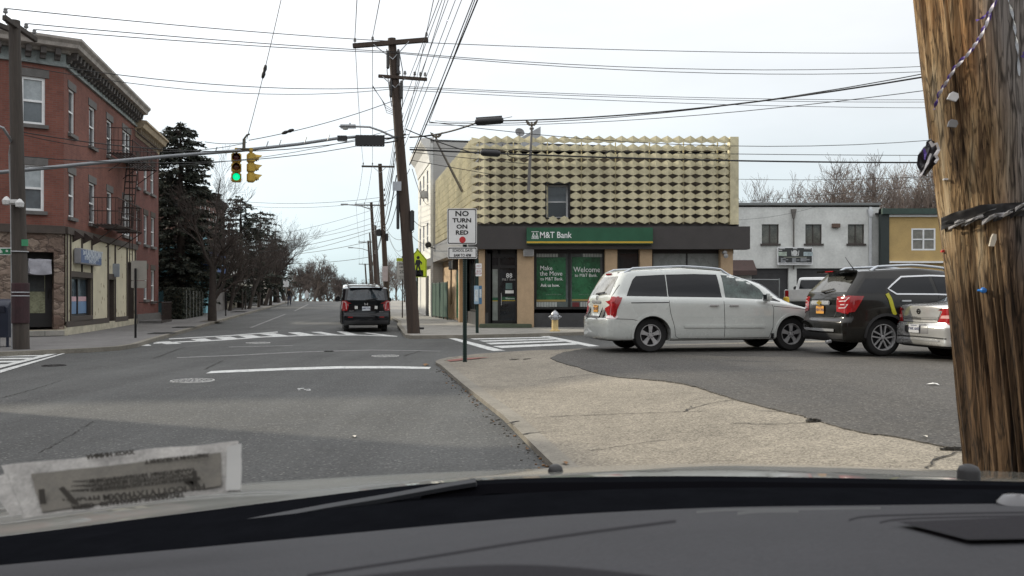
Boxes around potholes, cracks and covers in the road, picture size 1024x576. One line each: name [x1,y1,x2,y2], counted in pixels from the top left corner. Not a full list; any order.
crack [925,451,959,469]
crack [554,399,735,417]
